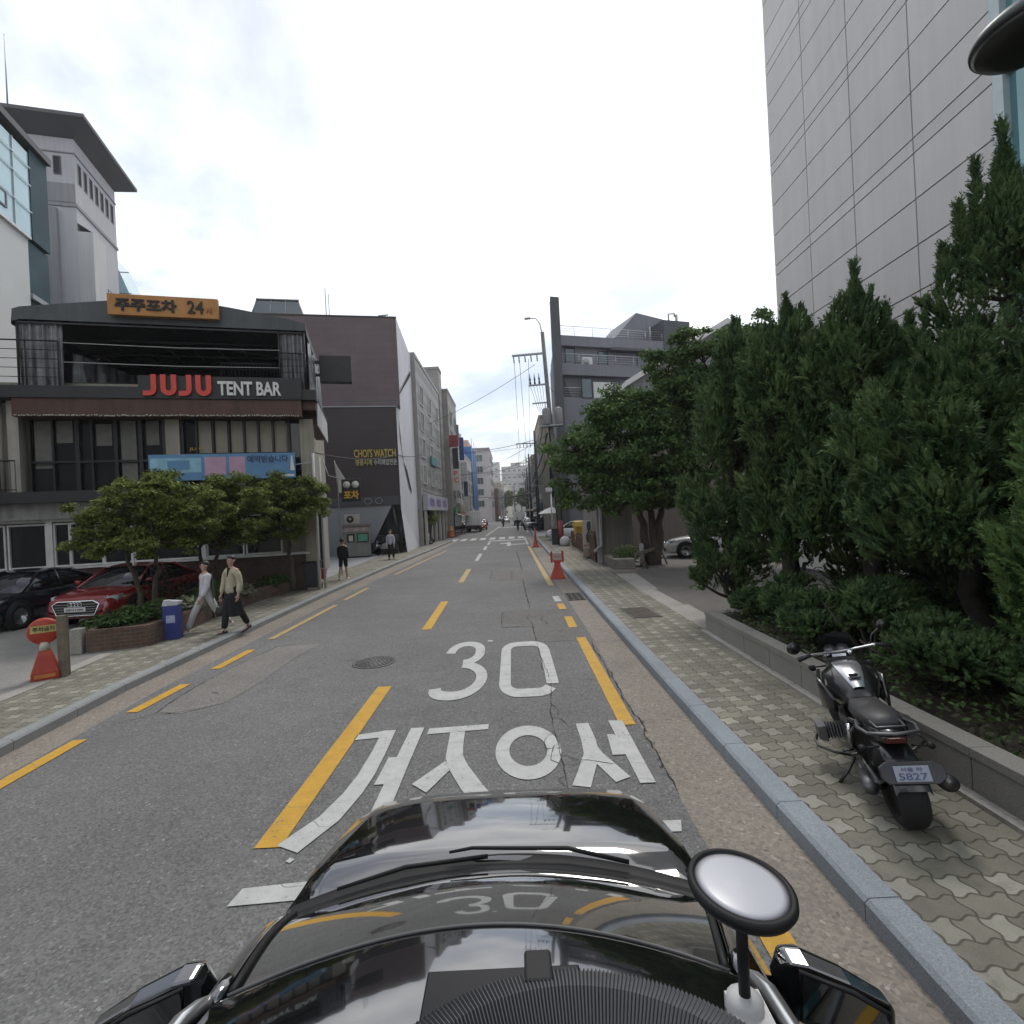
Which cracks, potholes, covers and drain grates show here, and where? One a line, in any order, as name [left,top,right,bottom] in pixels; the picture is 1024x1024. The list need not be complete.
drain grate [564,592,586,601]
crack [579,644,679,794]
utility cover [619,607,663,619]
manhole cover [352,656,396,669]
crack [490,551,613,787]
